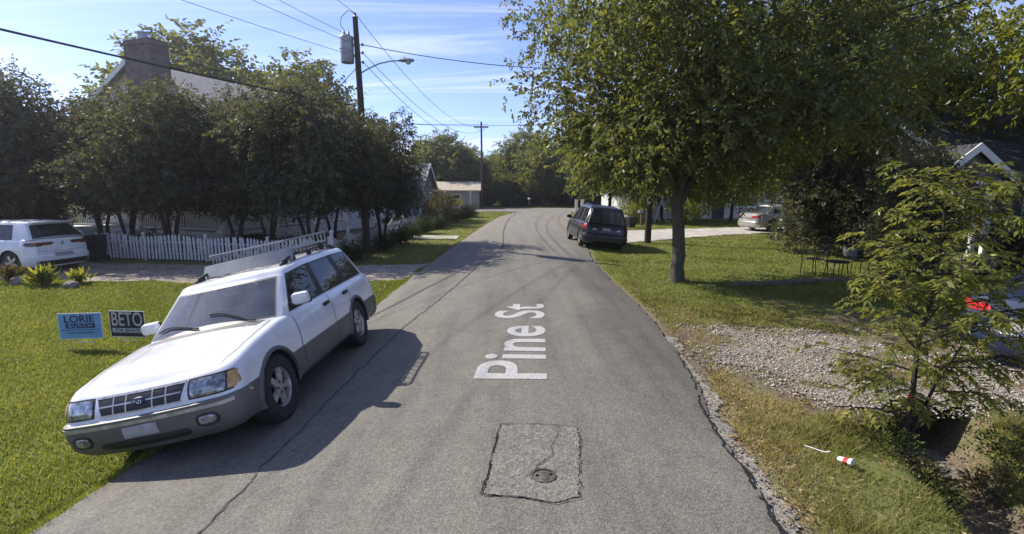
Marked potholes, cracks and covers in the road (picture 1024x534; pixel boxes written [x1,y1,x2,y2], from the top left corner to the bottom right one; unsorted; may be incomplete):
crack [480,423,582,503]
manhole cover [531,468,556,483]
